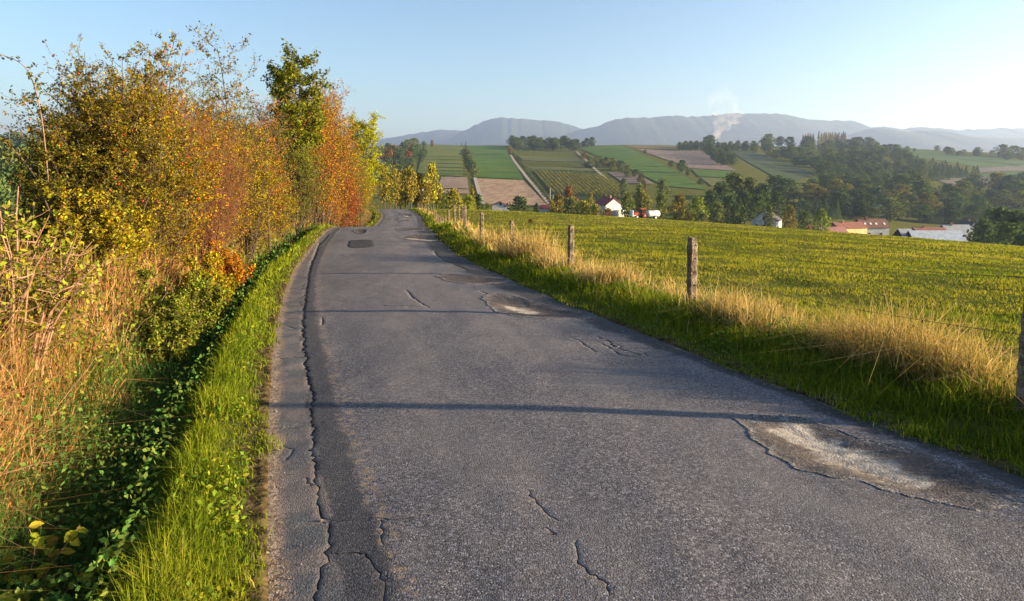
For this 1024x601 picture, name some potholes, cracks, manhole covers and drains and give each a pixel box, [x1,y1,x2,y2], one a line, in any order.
pothole [733,414,1024,512]
crack [566,336,761,384]
pothole [480,293,597,320]
crack [273,243,461,601]
crack [523,489,616,595]
